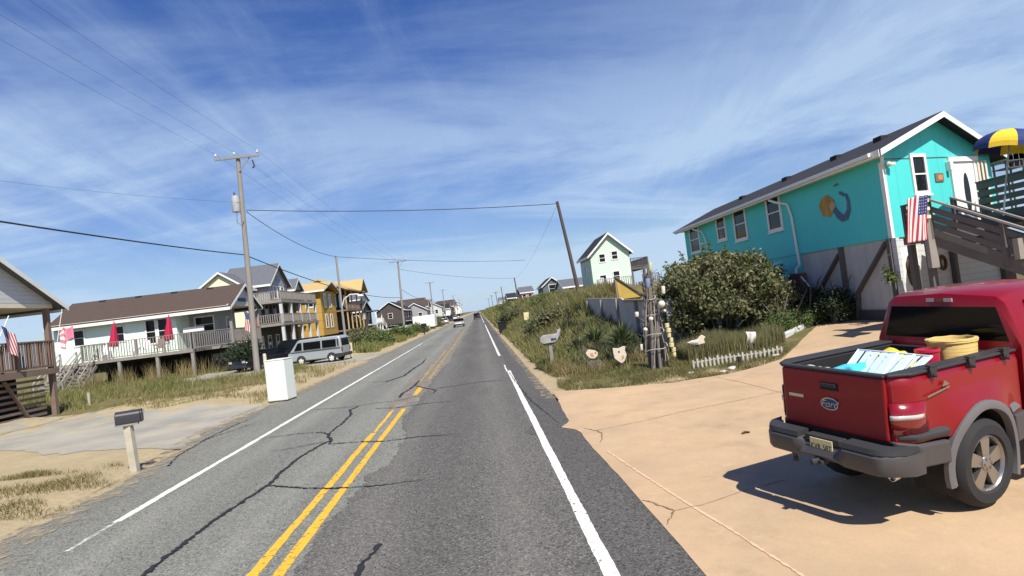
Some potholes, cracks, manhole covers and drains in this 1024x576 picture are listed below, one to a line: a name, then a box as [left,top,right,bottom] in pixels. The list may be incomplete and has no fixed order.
crack [644,500,675,524]
crack [354,543,382,576]
crack [167,415,257,466]
crack [375,358,506,409]
